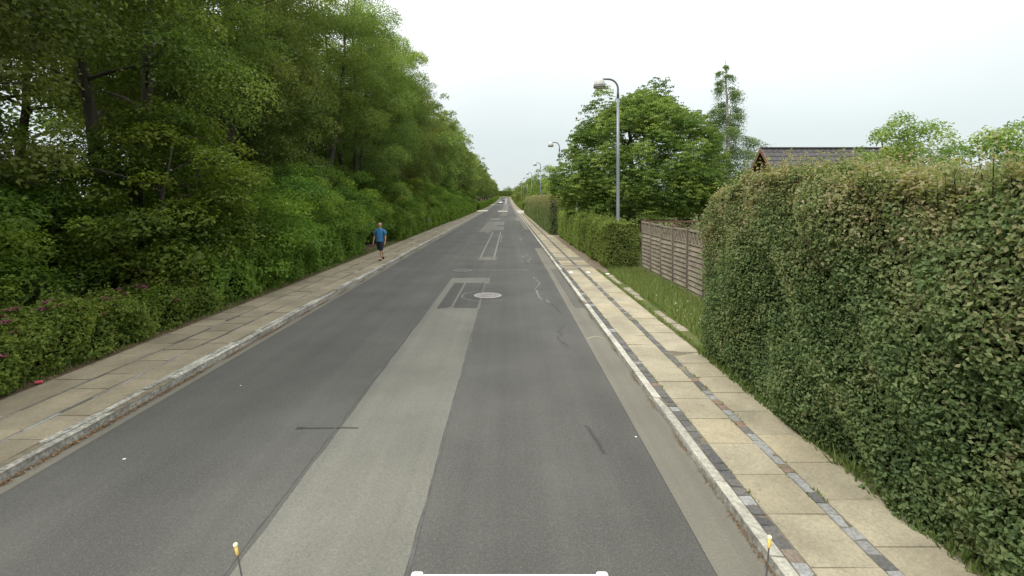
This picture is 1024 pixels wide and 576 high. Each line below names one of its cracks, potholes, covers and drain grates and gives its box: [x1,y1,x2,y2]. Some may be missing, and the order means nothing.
crack [473,238,568,347]
